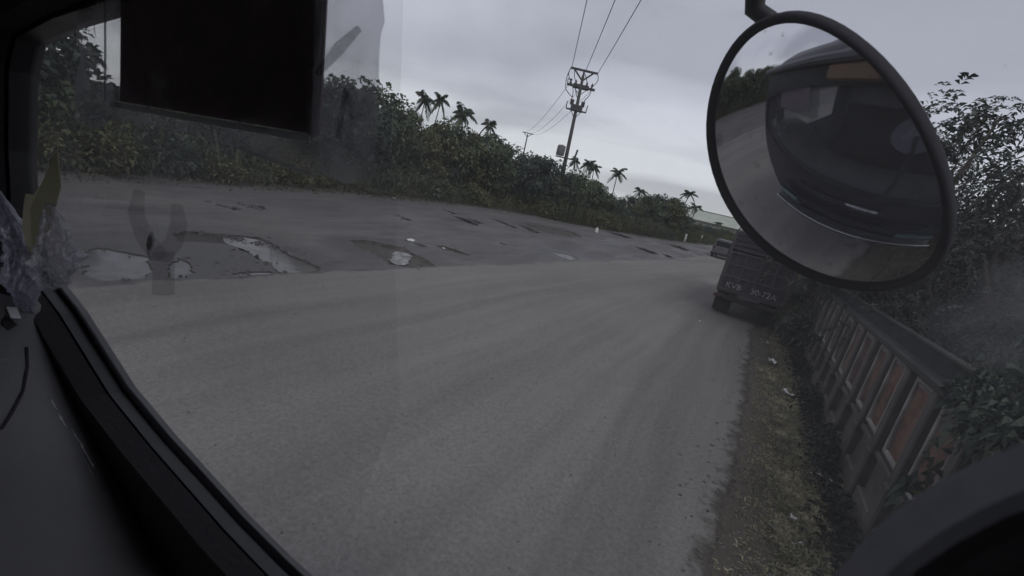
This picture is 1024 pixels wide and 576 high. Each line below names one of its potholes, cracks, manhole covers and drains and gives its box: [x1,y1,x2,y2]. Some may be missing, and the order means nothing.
pothole [350,240,434,268]
pothole [173,231,321,272]
pothole [524,223,580,237]
pothole [78,248,153,276]
